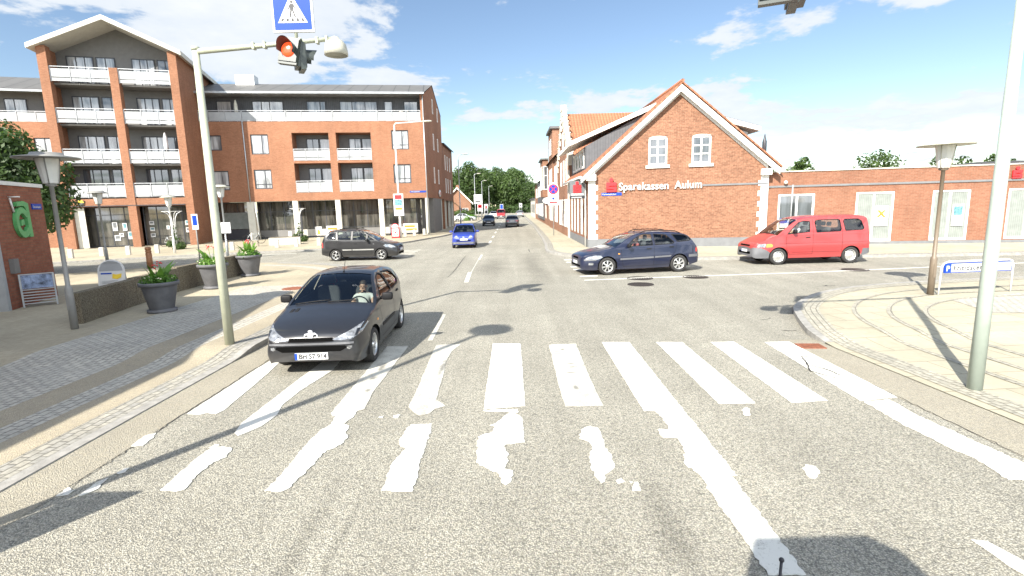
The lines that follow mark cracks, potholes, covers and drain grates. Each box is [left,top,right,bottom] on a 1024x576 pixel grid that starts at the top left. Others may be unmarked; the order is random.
crack [793,354,840,379]
